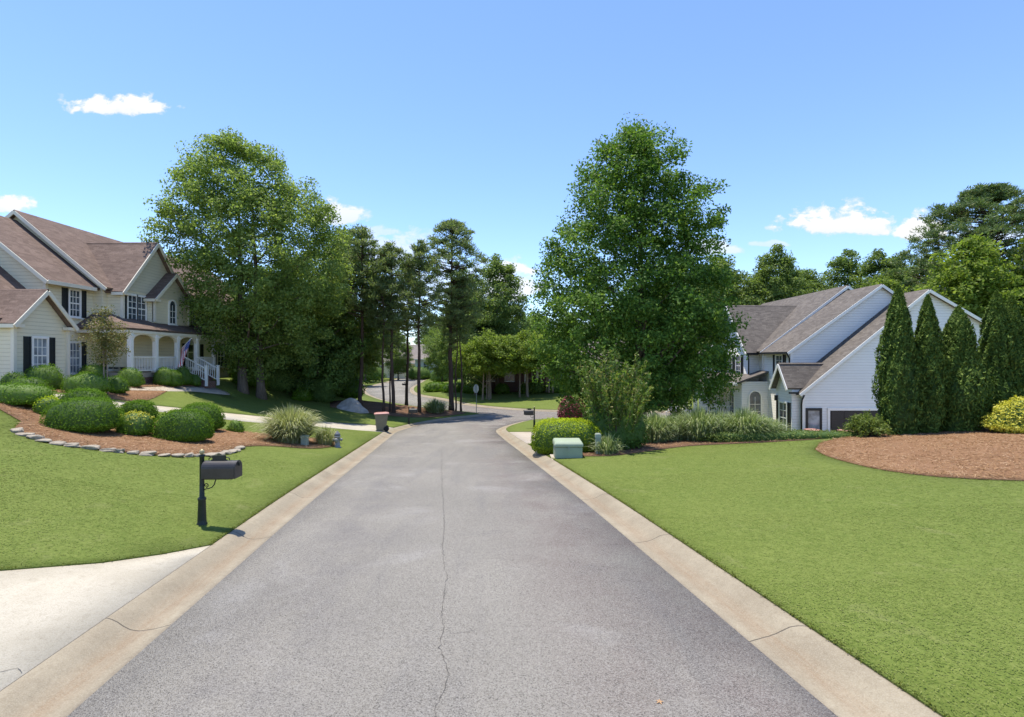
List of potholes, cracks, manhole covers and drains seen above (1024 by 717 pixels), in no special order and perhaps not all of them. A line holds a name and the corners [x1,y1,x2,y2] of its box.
crack [434,451,472,717]
